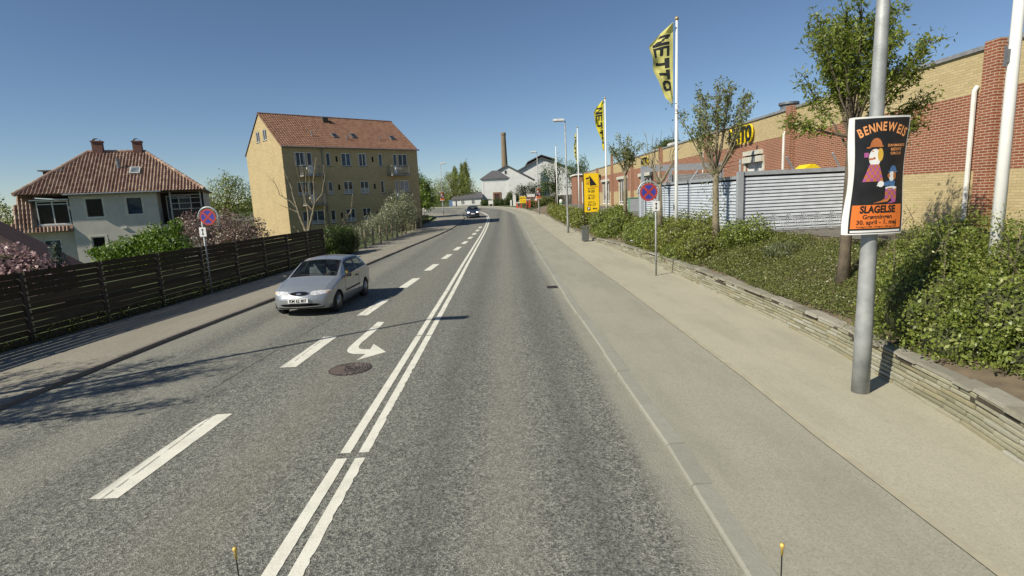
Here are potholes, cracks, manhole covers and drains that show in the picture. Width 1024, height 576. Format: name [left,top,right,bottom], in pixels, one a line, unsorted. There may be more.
manhole cover [328,362,372,376]
